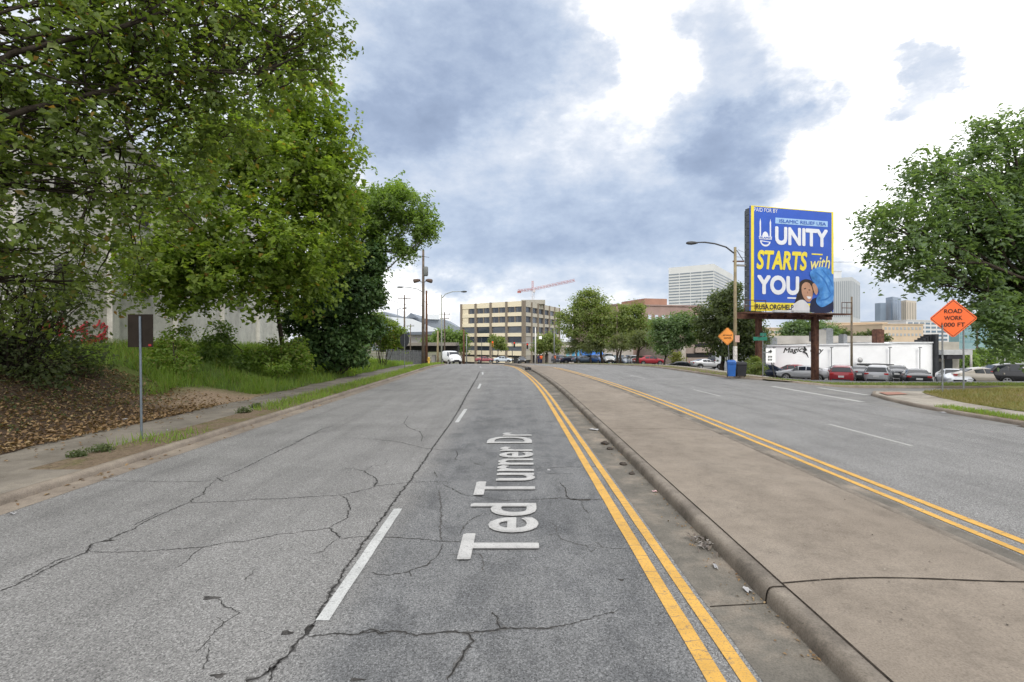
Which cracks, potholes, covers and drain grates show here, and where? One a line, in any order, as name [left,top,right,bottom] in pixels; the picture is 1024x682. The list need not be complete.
crack [196,598,240,669]
crack [363,416,479,465]
crack [309,610,618,681]
crack [548,523,630,552]
crack [0,425,603,591]
